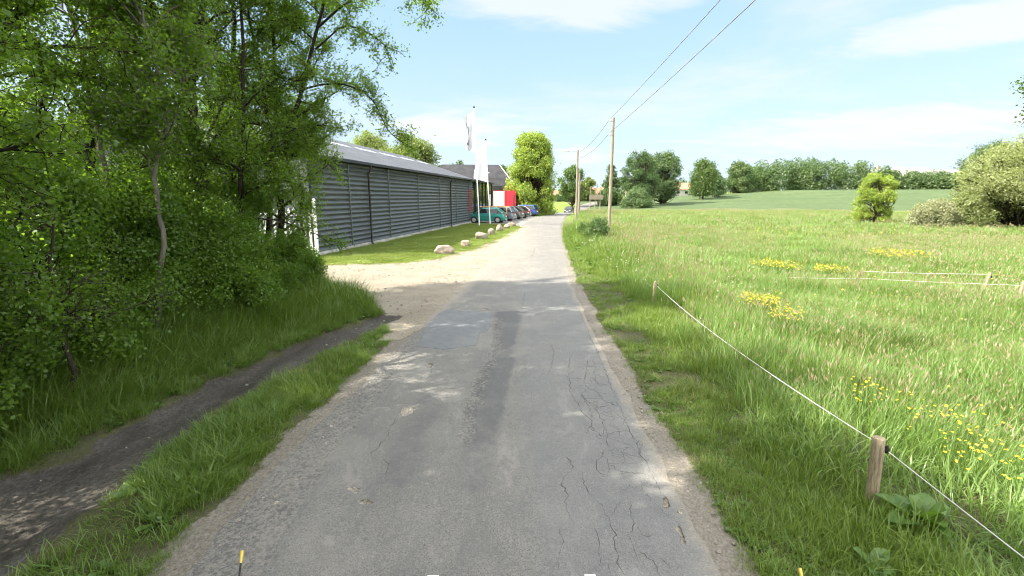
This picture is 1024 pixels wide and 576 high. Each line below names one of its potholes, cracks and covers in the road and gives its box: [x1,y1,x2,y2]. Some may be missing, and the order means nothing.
pothole [399,407,416,418]
crack [548,306,681,575]
